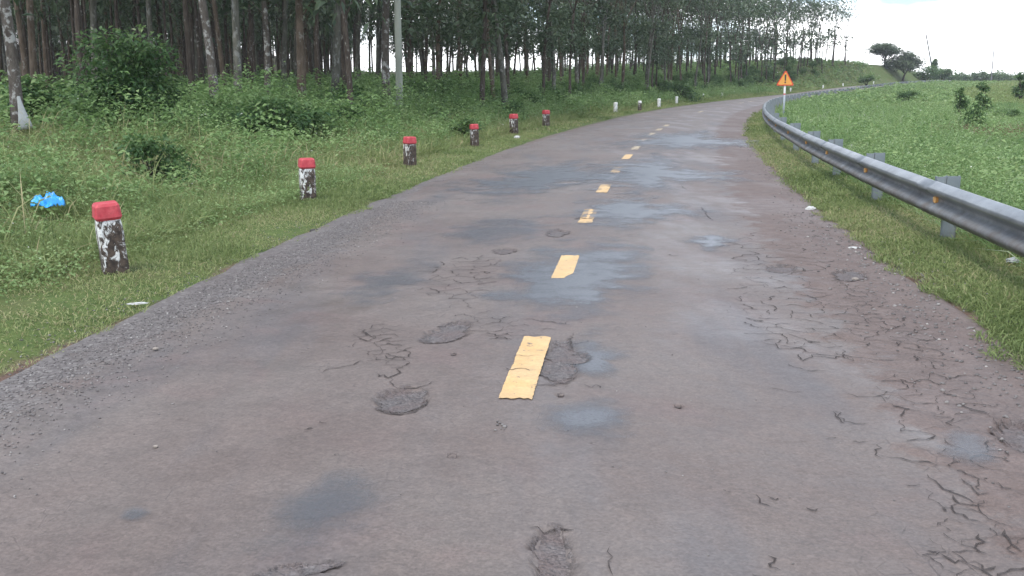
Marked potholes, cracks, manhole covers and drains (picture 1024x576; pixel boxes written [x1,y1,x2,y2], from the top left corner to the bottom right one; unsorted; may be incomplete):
crack [722,233,1024,576]
pothole [374,385,428,413]
crack [324,255,601,415]
pothole [527,523,573,576]
pothole [419,320,472,344]
pothole [832,270,867,282]
pothole [769,264,796,273]
pothole [540,338,589,384]
